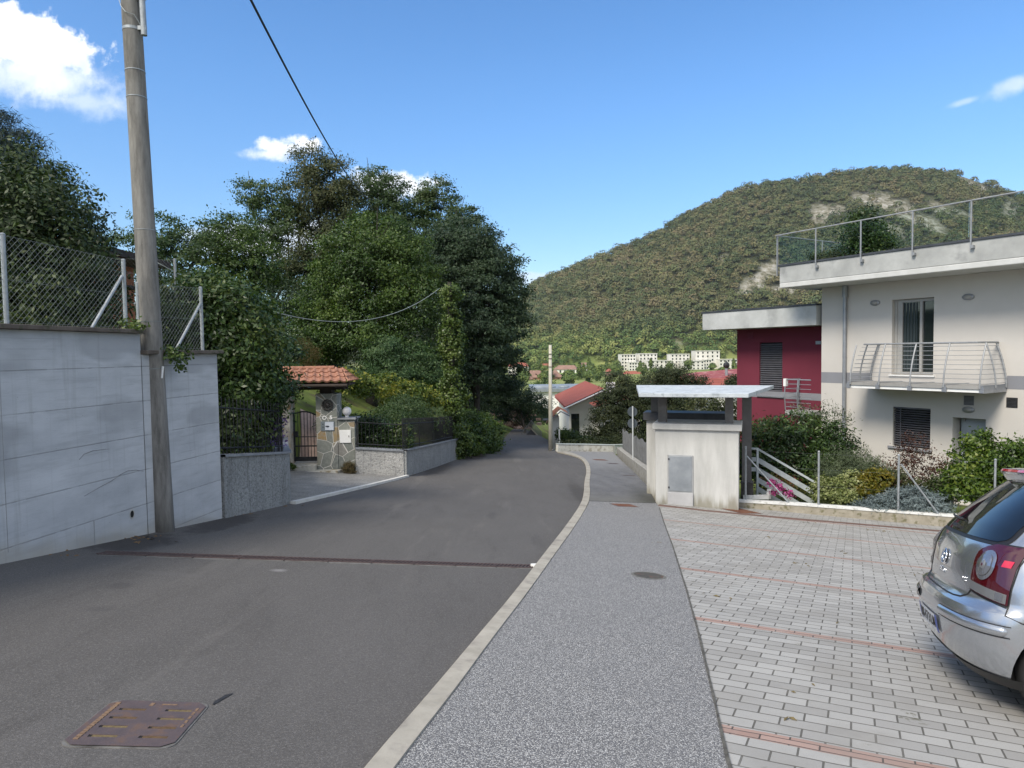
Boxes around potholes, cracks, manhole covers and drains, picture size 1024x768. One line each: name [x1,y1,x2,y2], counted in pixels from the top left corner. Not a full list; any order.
manhole cover [62,700,208,750]
